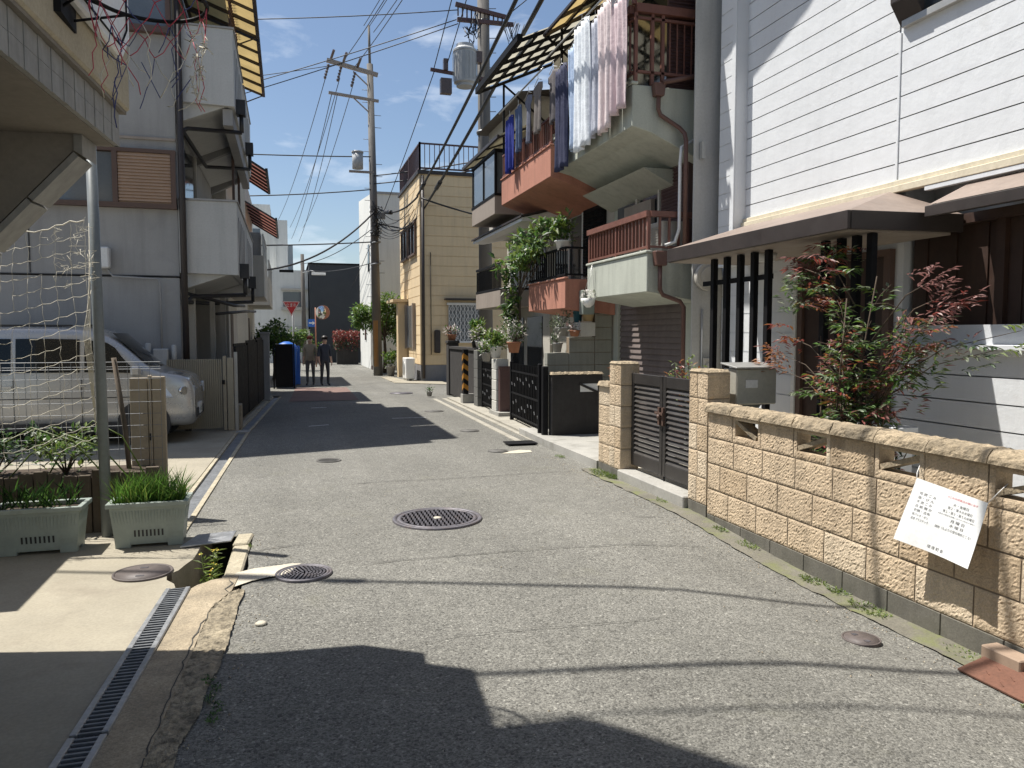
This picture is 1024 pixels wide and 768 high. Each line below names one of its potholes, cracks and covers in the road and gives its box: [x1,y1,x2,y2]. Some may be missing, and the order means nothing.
crack [140,611,209,768]
drain grate [69,586,190,739]
drain grate [48,733,107,768]
manhole cover [275,564,332,583]
manhole cover [111,563,174,583]
manhole cover [392,507,482,531]
manhole cover [841,631,882,648]
